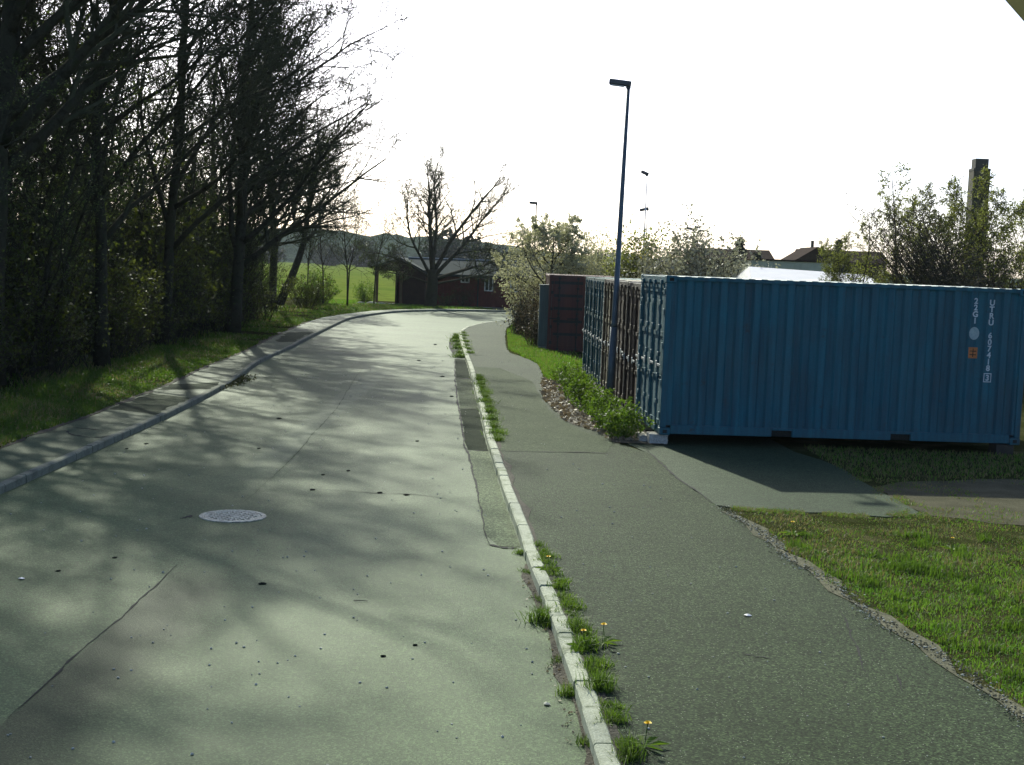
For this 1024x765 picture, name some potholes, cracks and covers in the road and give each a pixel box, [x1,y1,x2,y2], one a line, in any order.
manhole cover [199,510,266,523]
